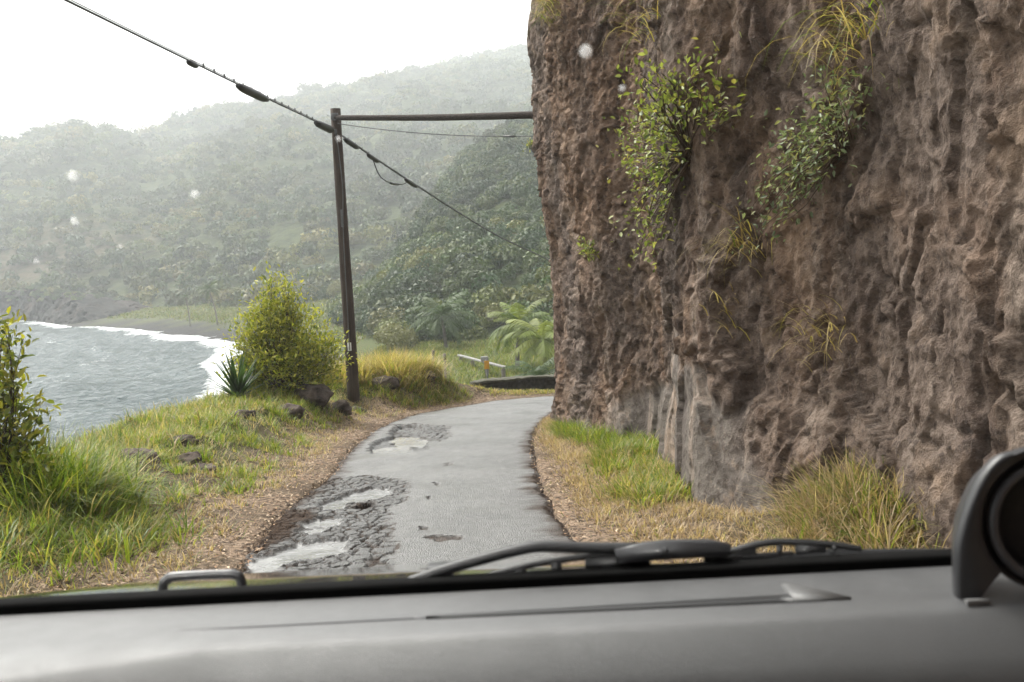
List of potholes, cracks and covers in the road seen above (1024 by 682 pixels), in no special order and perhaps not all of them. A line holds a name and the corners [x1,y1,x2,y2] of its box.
pothole [423,534,465,542]
pothole [242,535,355,574]
pothole [314,485,395,511]
pothole [291,514,349,535]
pothole [364,424,439,454]
